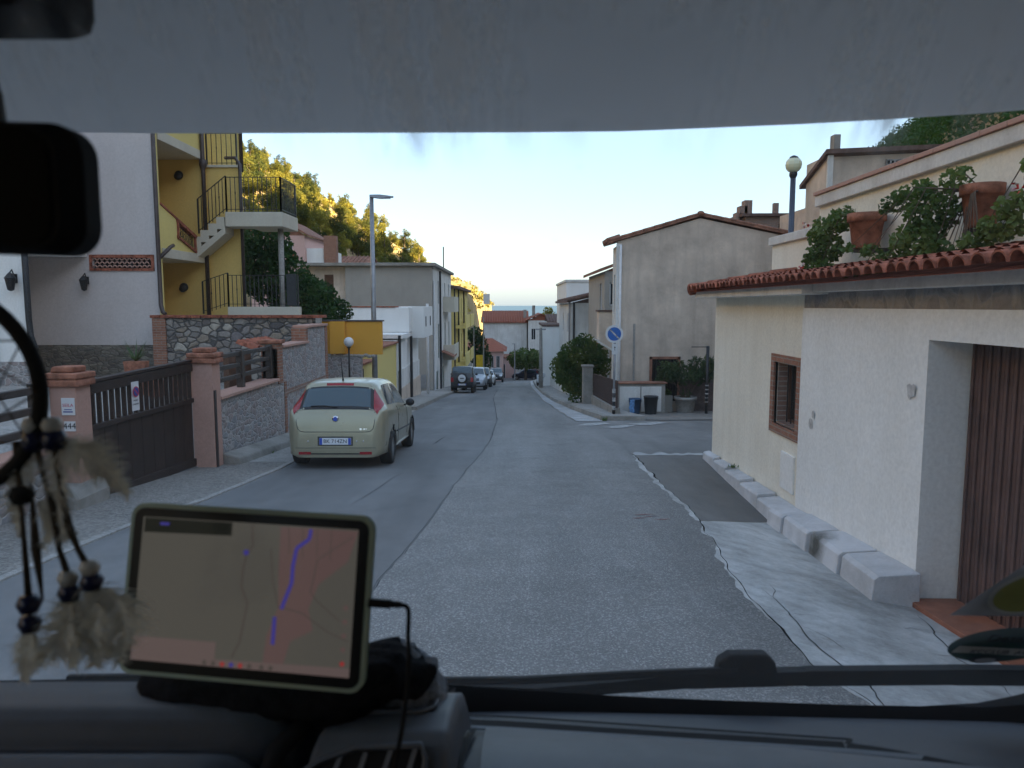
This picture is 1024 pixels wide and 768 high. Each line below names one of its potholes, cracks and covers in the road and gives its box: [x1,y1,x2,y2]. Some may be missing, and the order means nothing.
crack [629,453,884,705]
